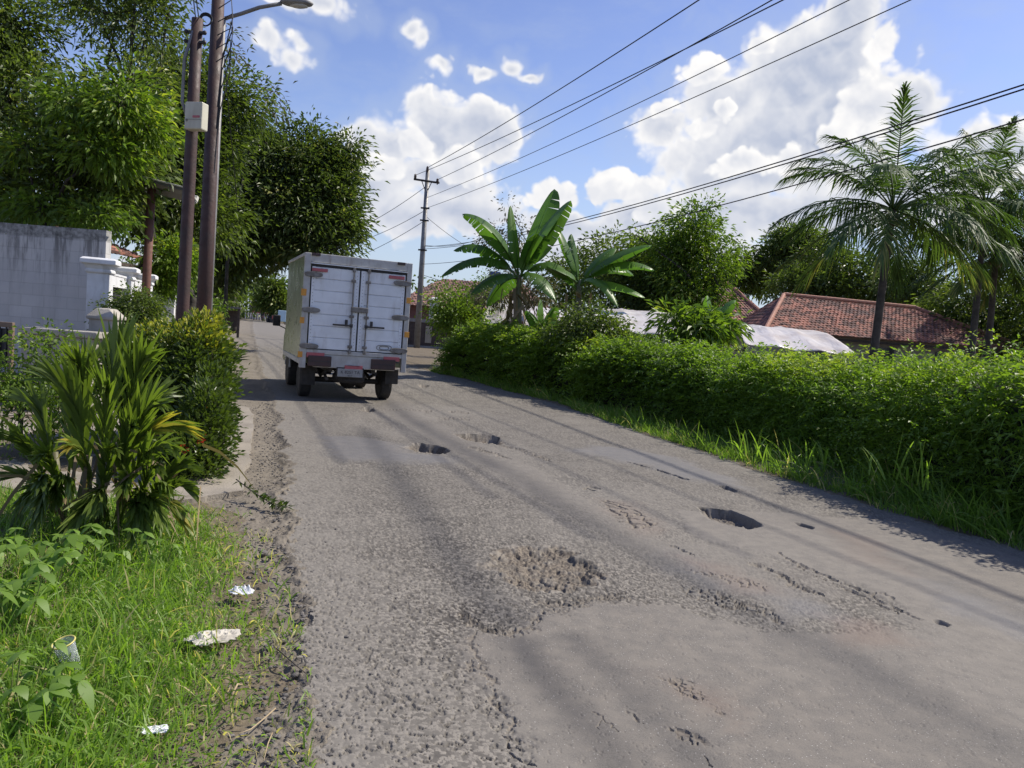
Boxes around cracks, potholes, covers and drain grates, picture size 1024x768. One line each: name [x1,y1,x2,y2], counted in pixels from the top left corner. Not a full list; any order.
crack [582,485,924,625]
pothole [450,433,507,445]
pothole [399,443,453,455]
pothole [696,506,764,530]
crack [625,461,690,480]
pothole [471,544,612,594]
crack [657,676,728,768]
